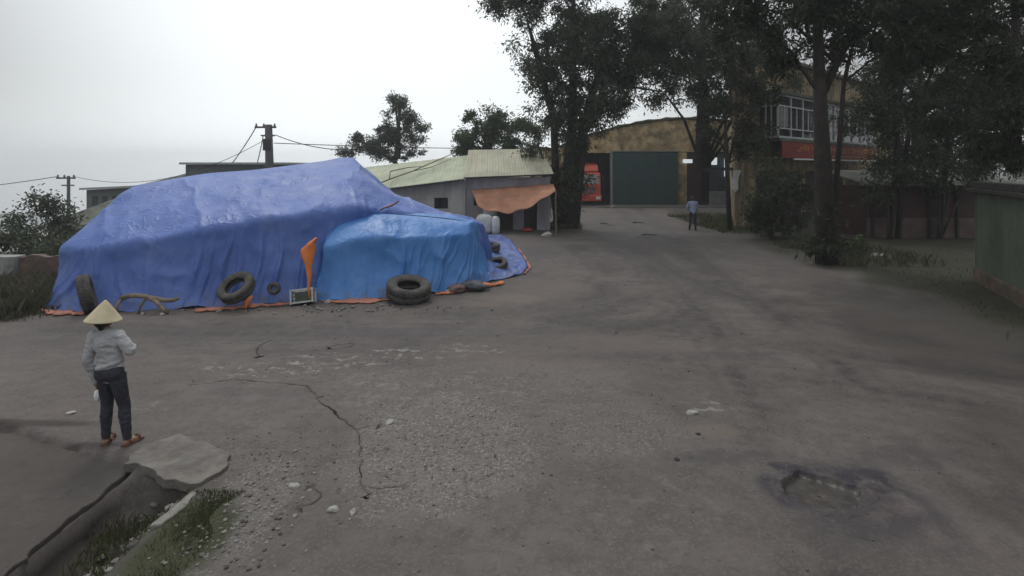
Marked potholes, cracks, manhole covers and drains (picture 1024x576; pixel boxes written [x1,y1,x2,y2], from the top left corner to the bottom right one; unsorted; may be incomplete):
crack [248,340,278,358]
crack [189,377,403,514]
pothole [769,464,881,520]
